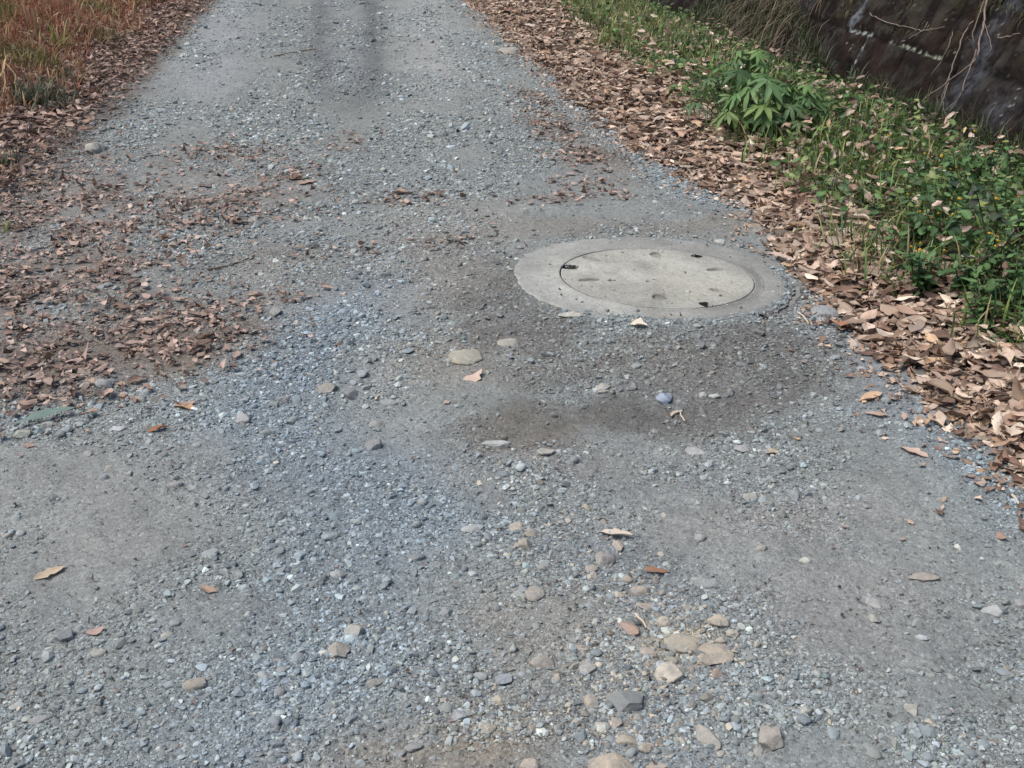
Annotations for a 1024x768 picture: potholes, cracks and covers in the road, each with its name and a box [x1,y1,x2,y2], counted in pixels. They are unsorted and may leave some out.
manhole cover [514,237,801,319]
